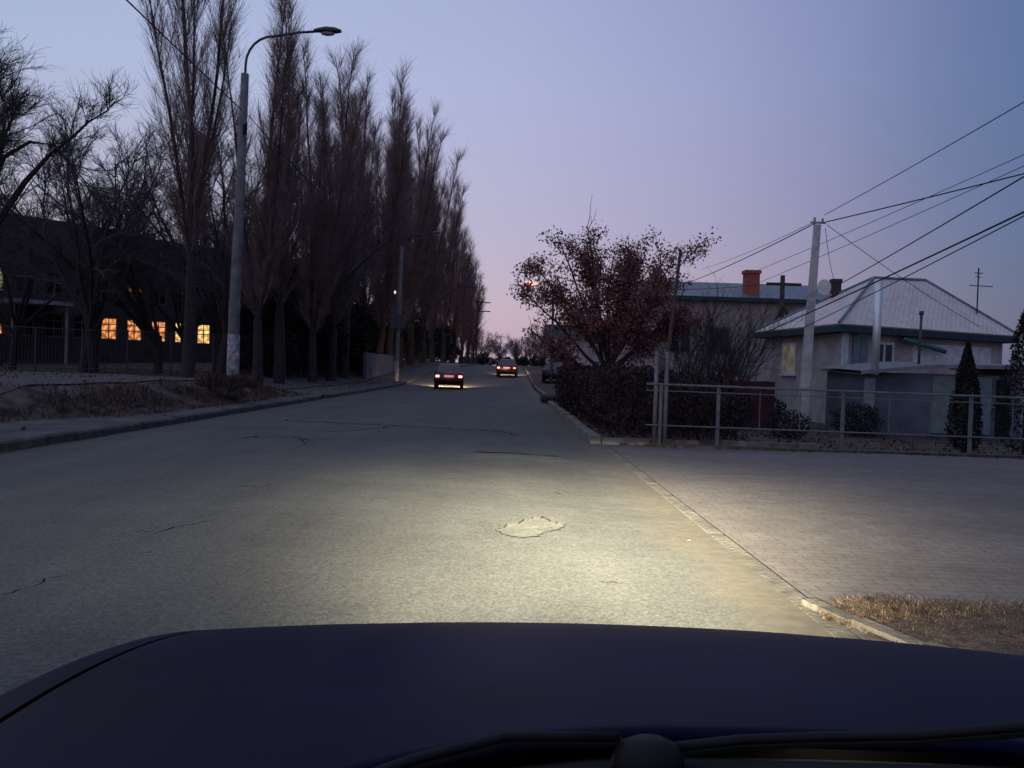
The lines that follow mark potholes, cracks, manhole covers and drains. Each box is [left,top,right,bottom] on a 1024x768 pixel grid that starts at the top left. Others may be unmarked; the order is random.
crack [2,575,66,595]
crack [245,420,517,445]
crack [123,518,218,554]
